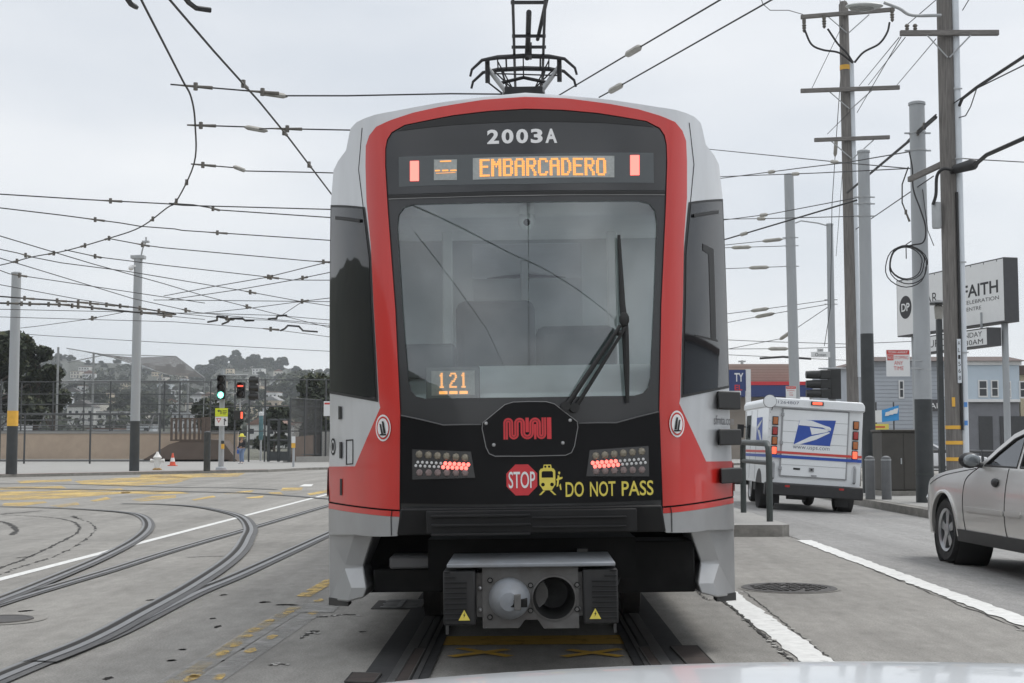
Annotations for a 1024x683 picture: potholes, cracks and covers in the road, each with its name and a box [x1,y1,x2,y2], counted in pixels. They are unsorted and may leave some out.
manhole cover [0,614,47,625]
manhole cover [738,582,841,593]
